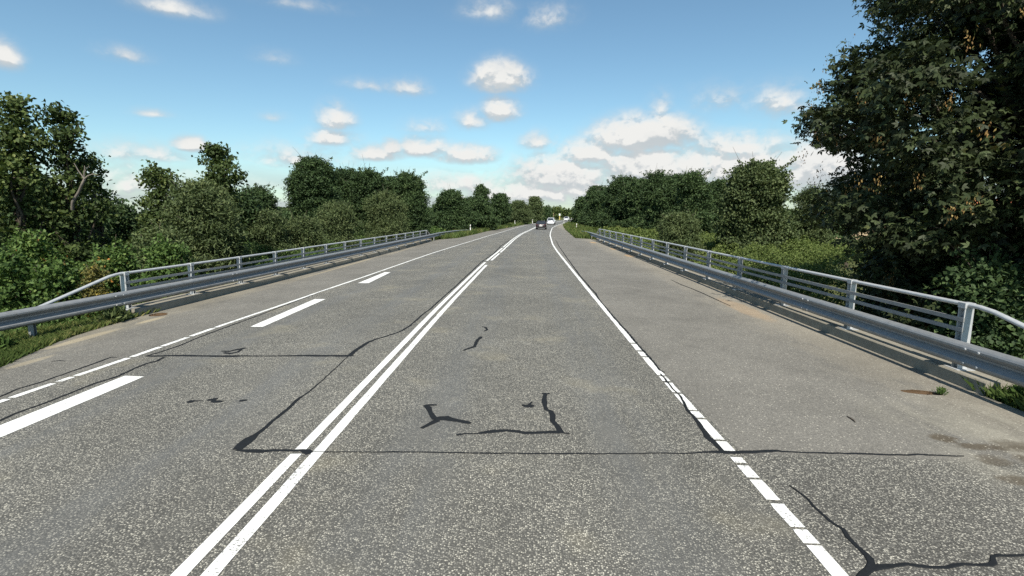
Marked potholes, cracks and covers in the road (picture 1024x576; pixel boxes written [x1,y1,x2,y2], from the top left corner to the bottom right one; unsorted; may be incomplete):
crack [313,241,962,457]
crack [0,357,115,397]
crack [789,485,1024,576]
